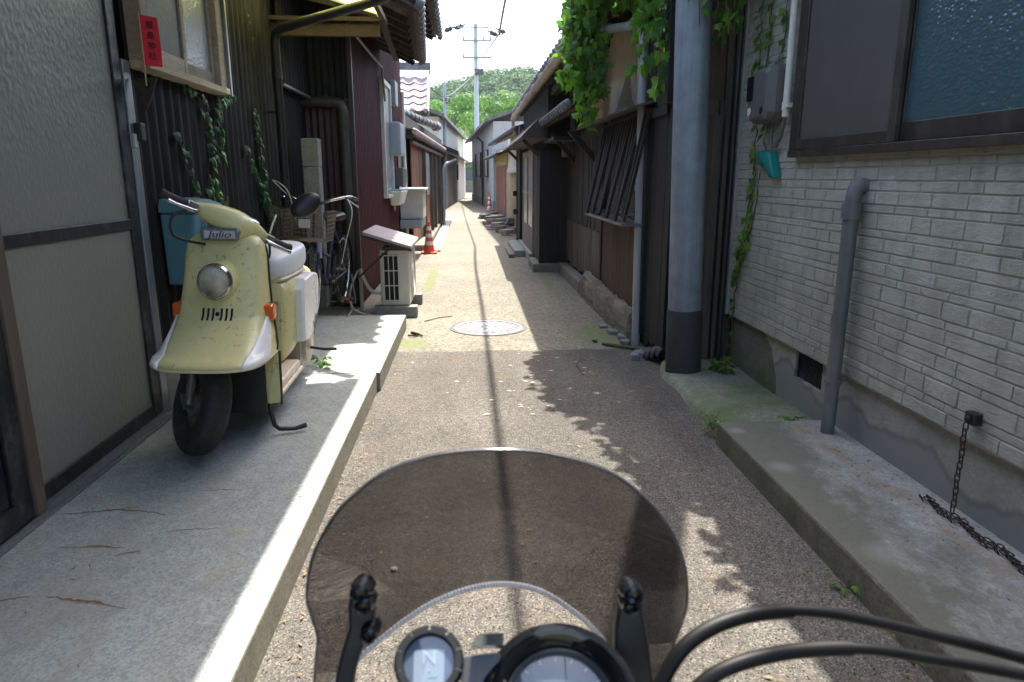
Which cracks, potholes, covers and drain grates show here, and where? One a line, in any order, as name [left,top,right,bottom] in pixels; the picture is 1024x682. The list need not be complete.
manhole cover [450,319,527,336]
crack [55,507,215,532]
crack [47,596,126,609]
crack [60,544,141,556]
